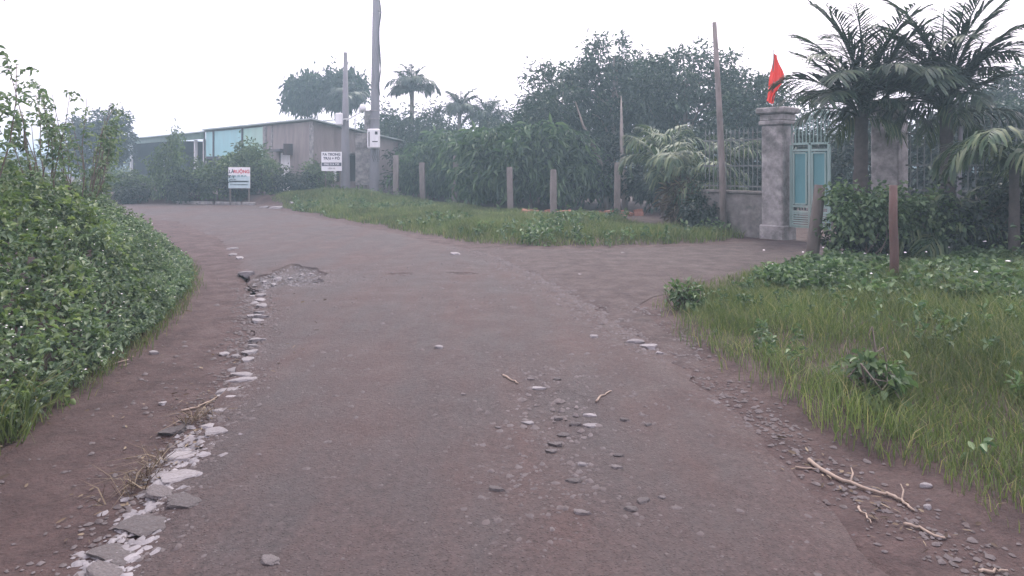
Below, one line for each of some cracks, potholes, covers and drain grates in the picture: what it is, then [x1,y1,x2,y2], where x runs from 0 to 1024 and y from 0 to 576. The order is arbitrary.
pothole [243,264,328,293]
